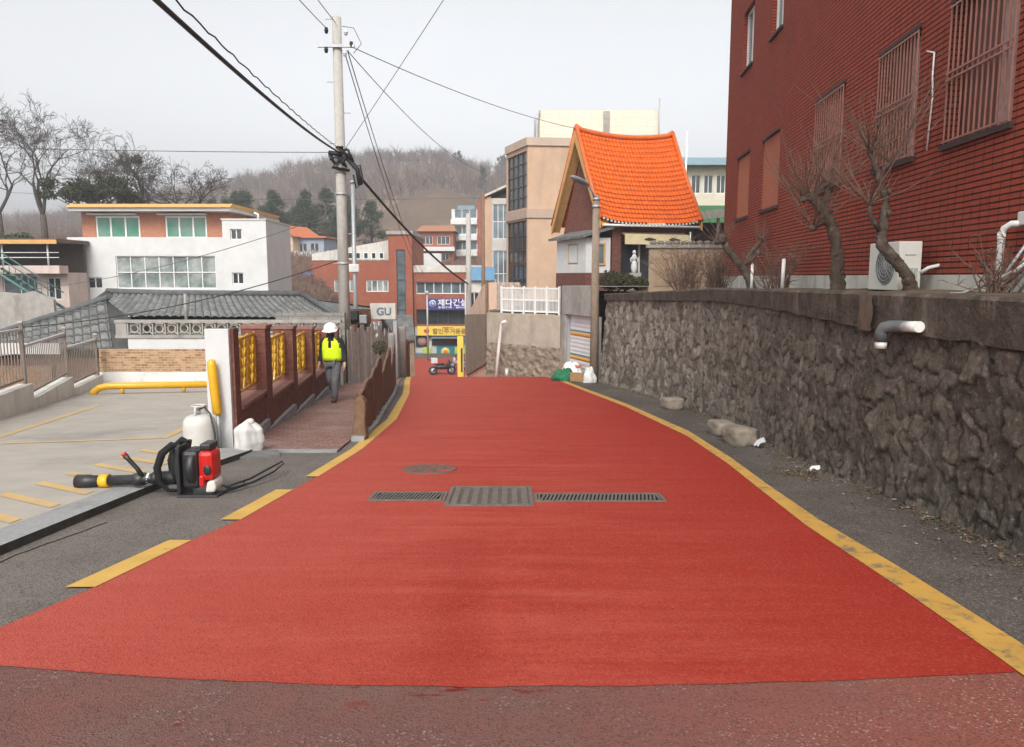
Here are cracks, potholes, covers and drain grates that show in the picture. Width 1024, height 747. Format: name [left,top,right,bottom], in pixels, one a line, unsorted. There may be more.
manhole cover [403,464,457,474]
drain grate [367,491,448,501]
drain grate [444,486,534,506]
drain grate [534,493,667,502]
crack [0,522,107,562]
